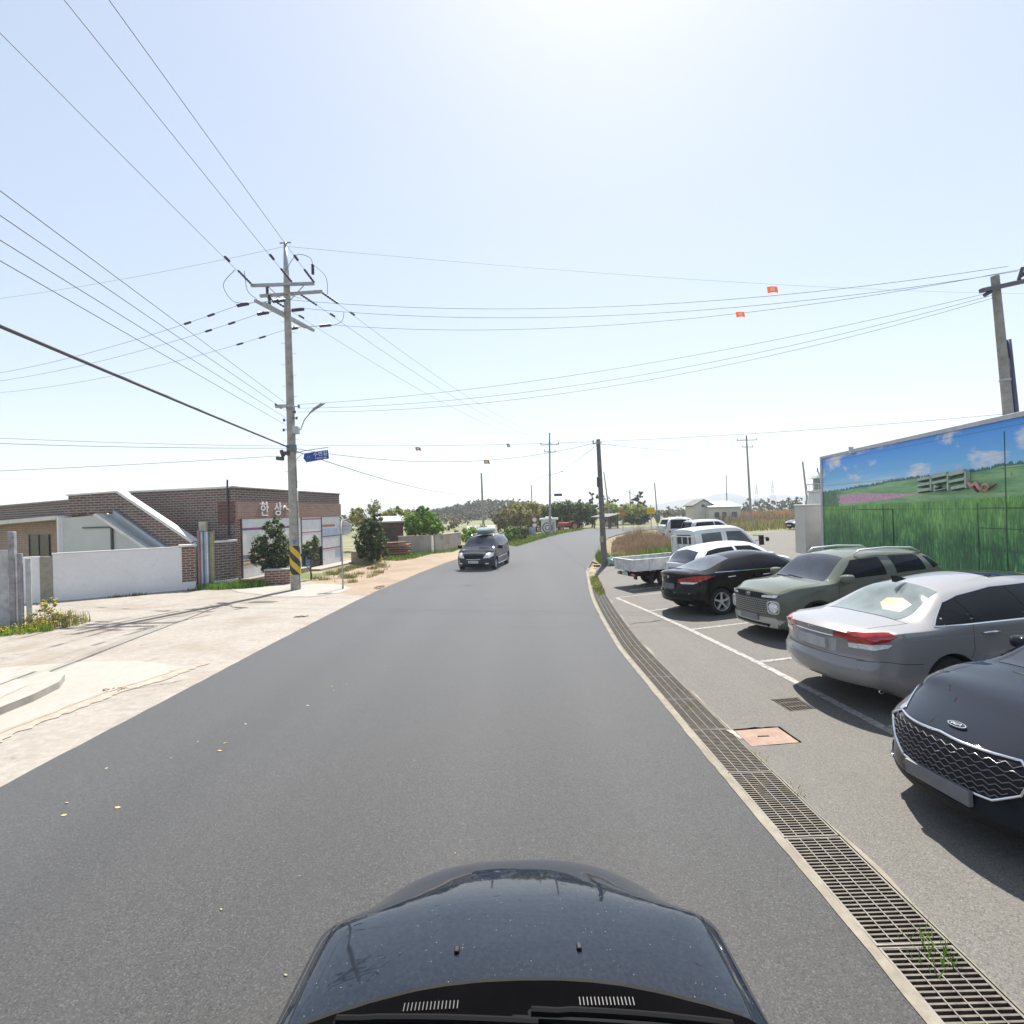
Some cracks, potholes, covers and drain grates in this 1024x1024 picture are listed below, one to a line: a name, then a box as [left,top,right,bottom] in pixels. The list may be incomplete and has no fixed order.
drain grate [785,836,950,947]
drain grate [614,634,643,646]
drain grate [632,659,674,677]
manhole cover [733,727,800,746]
drain grate [878,945,1024,1024]
drain grate [729,772,839,838]
drain grate [692,729,772,773]
drain grate [771,697,815,712]
drain grate [666,699,728,730]
drain grate [621,645,657,660]
drain grate [647,676,697,700]
